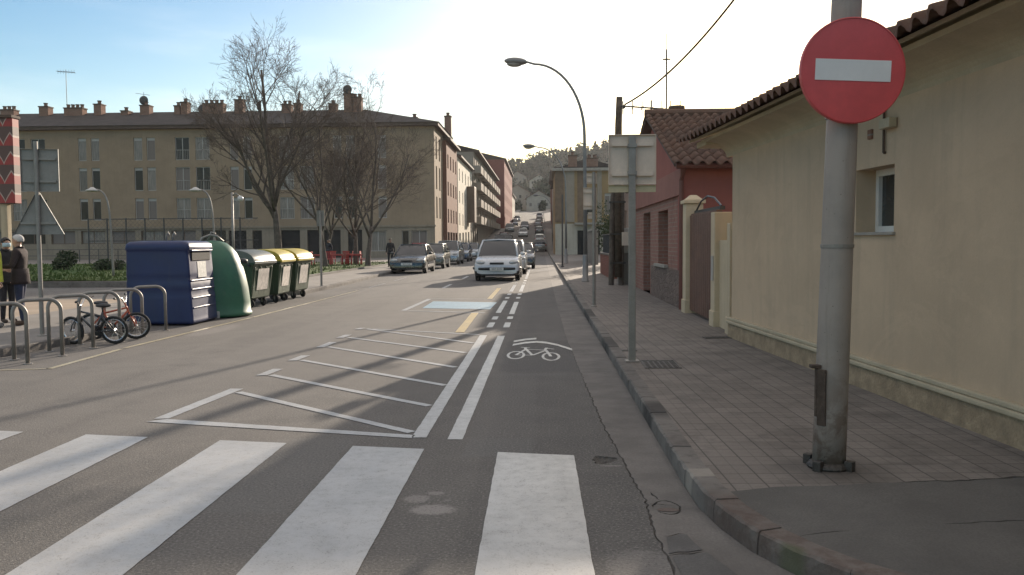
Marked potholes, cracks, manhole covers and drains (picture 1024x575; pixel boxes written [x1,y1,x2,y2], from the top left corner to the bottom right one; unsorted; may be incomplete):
crack [568,344,700,575]
pothole [593,456,618,464]
